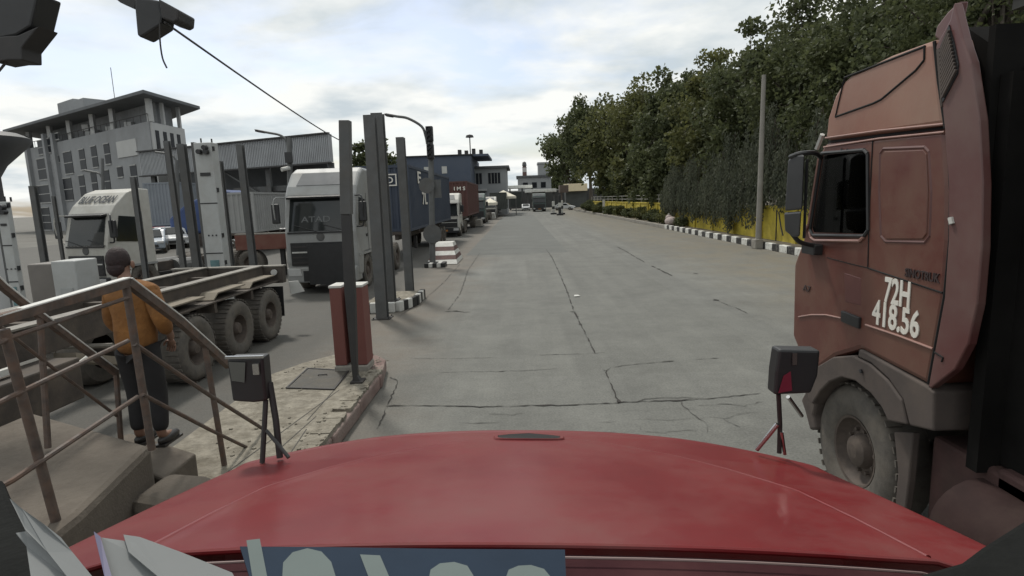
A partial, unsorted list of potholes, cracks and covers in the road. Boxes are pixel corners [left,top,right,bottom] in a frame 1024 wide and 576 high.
crack [377,358,763,433]
manhole cover [286,367,349,390]
